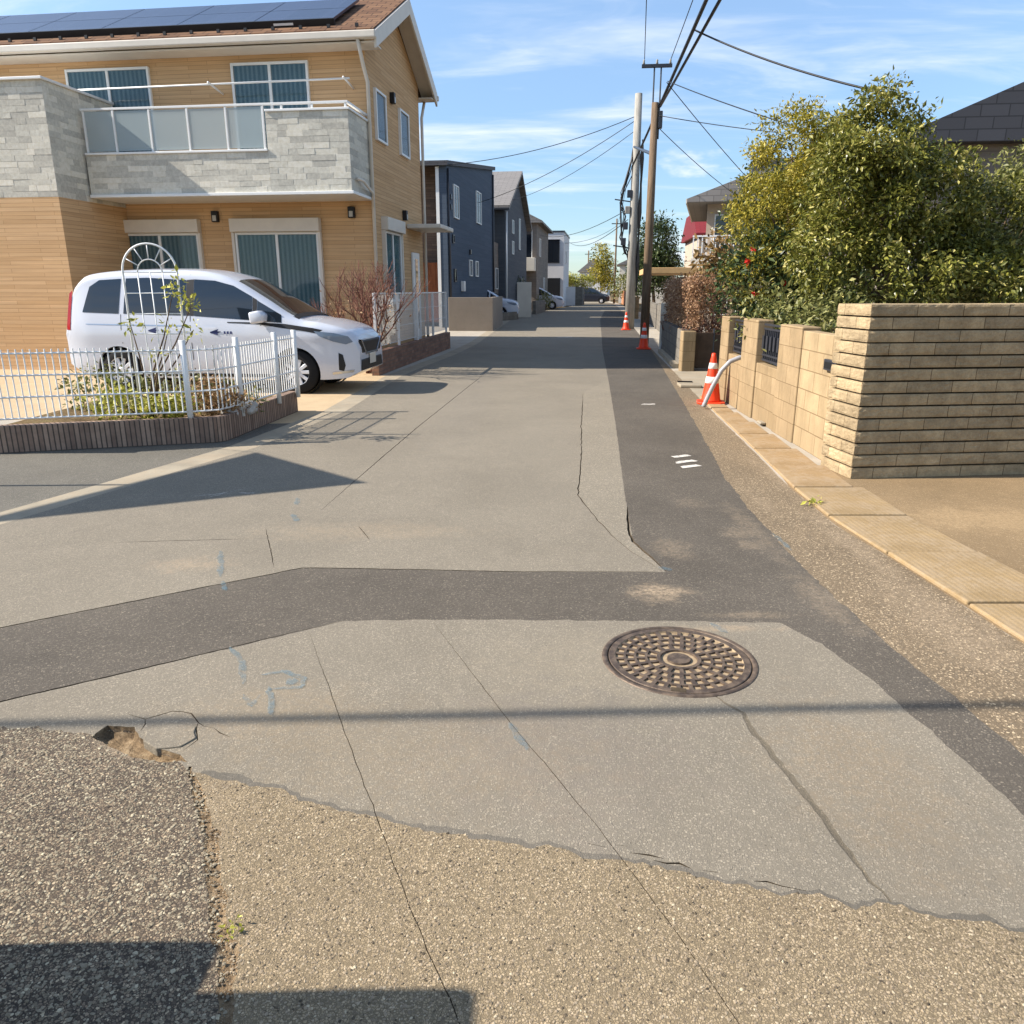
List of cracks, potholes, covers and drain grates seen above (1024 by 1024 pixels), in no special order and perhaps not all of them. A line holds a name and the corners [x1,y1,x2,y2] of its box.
pothole [92,725,187,762]
crack [129,711,229,748]
manhole cover [602,626,759,702]
crack [593,697,892,902]
